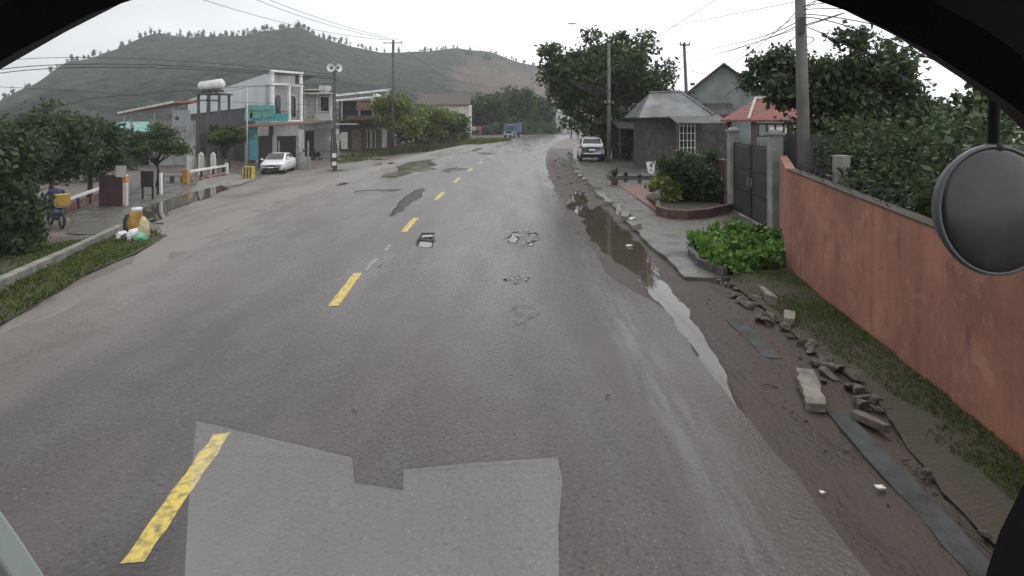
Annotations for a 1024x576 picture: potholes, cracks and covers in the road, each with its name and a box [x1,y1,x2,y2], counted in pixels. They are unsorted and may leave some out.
pothole [390,188,425,216]
crack [502,275,536,331]
pothole [415,232,436,248]
